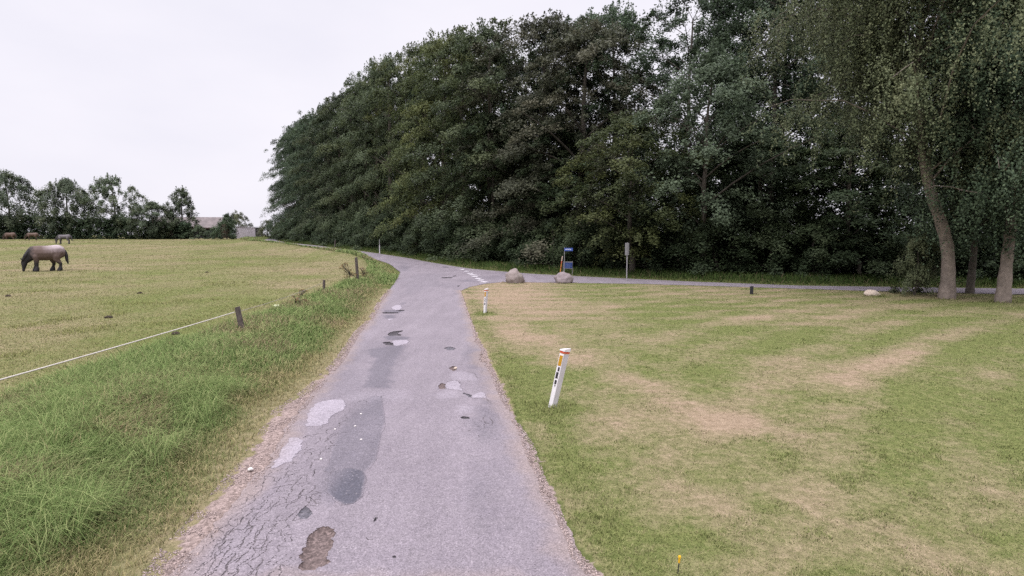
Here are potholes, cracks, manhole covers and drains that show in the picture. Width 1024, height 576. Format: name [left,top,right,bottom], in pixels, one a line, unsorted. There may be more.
pothole [297,506,312,519]
crack [189,420,346,576]
pothole [298,526,336,571]
